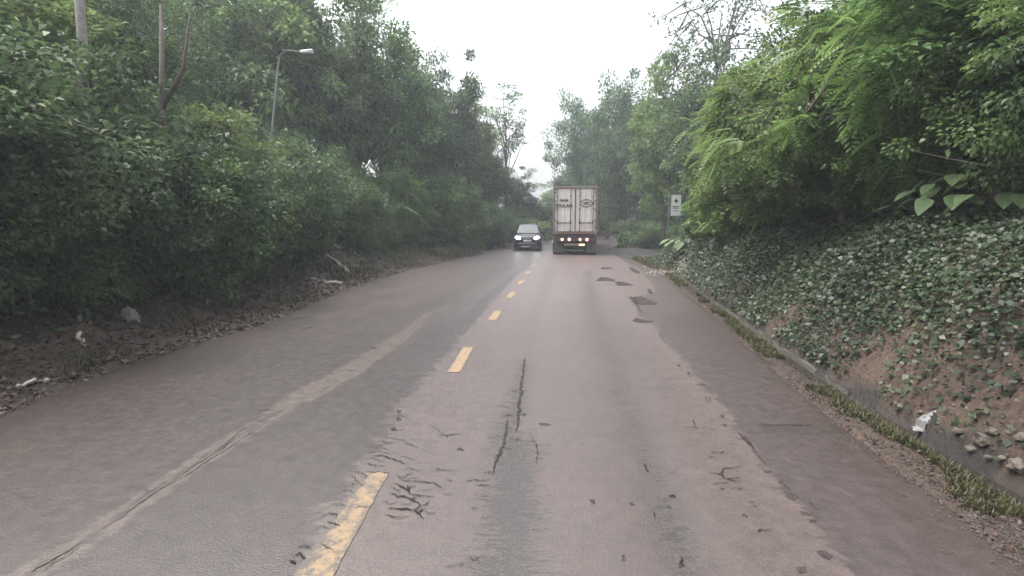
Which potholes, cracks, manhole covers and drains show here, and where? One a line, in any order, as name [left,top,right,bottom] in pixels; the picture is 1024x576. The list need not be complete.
pothole [629,296,657,305]
crack [289,359,539,563]
crack [708,424,802,531]
